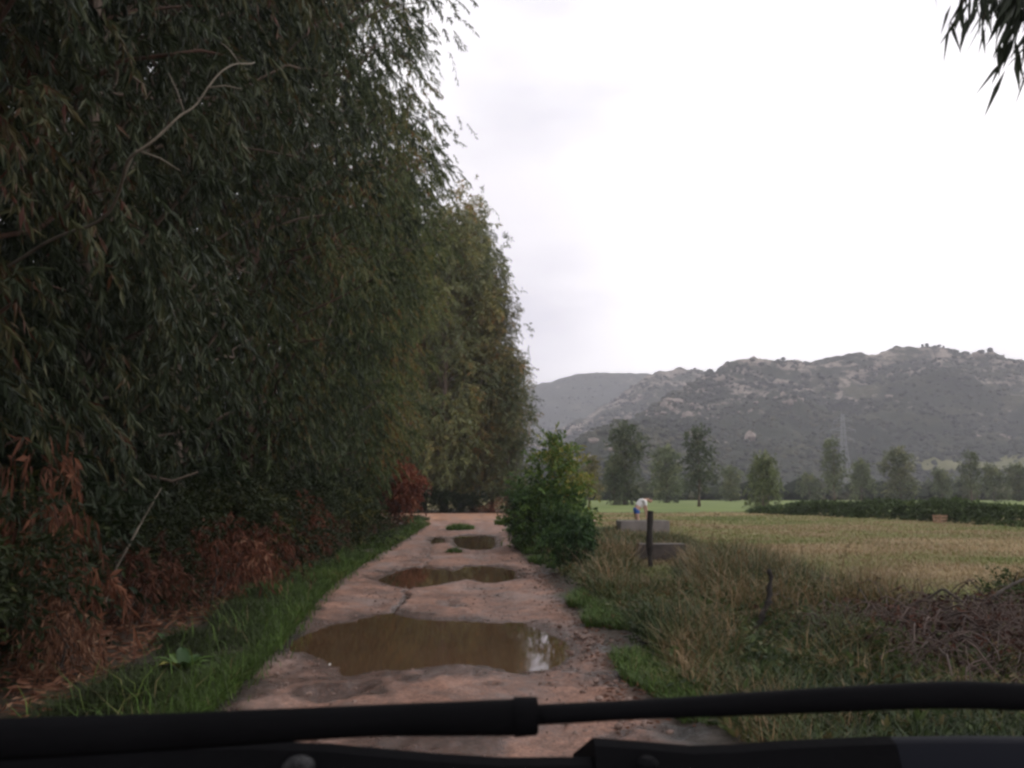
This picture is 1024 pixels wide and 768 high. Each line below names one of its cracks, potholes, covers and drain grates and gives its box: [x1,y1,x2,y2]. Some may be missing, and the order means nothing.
pothole [377,565,521,589]
pothole [452,534,499,550]
pothole [286,613,577,676]
crack [390,588,414,614]
pothole [296,680,394,703]
